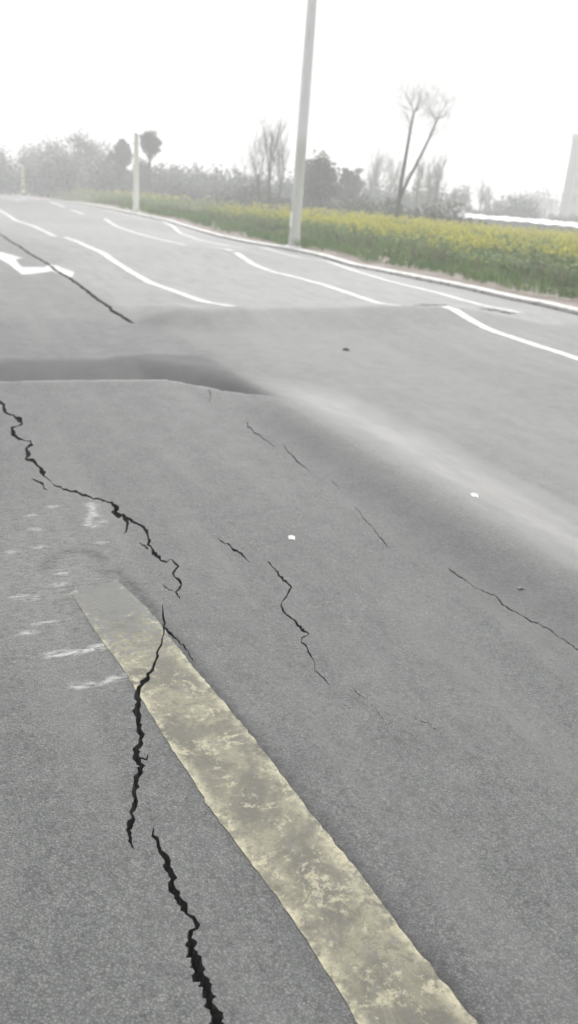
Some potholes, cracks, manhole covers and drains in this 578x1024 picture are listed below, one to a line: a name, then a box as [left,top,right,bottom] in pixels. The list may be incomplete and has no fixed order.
crack [0,401,225,1024]
crack [449,568,578,650]
crack [247,423,390,549]
crack [219,539,328,683]
